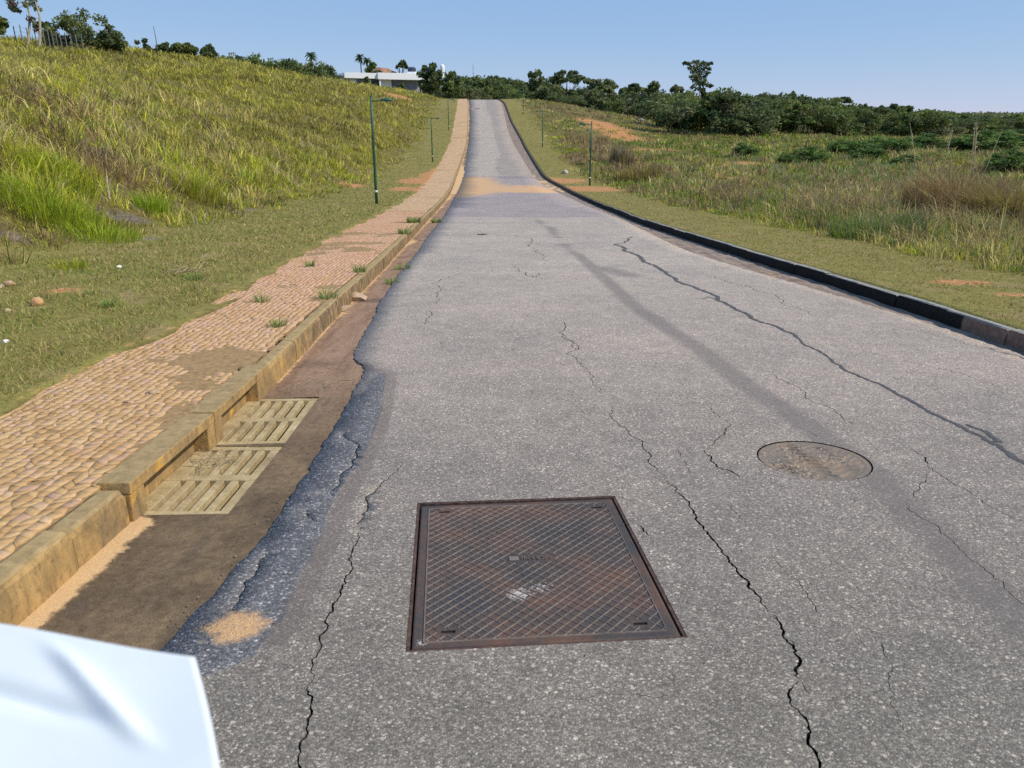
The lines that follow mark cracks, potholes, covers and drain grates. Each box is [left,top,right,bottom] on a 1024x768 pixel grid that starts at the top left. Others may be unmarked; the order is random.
crack [908,450,1023,604]
crack [297,433,403,768]
drain grate [97,414,282,522]
crack [514,238,822,768]
manhole cover [406,496,687,700]
manhole cover [757,441,873,481]
